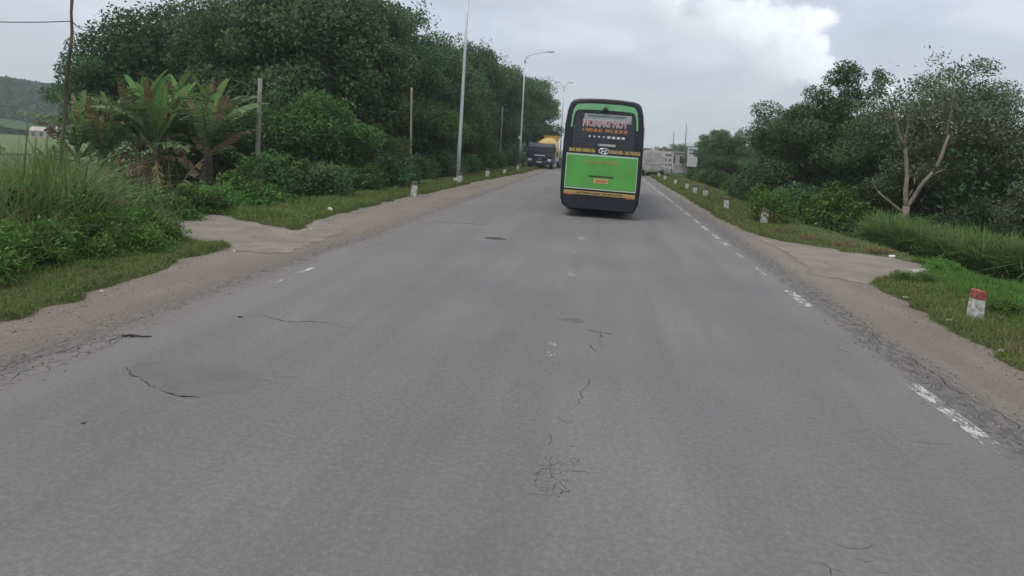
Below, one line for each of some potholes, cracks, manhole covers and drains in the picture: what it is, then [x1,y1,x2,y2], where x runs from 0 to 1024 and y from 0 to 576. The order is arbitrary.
crack [0,333,132,386]
crack [531,374,596,497]
crack [810,298,1023,460]
crack [819,544,885,575]
